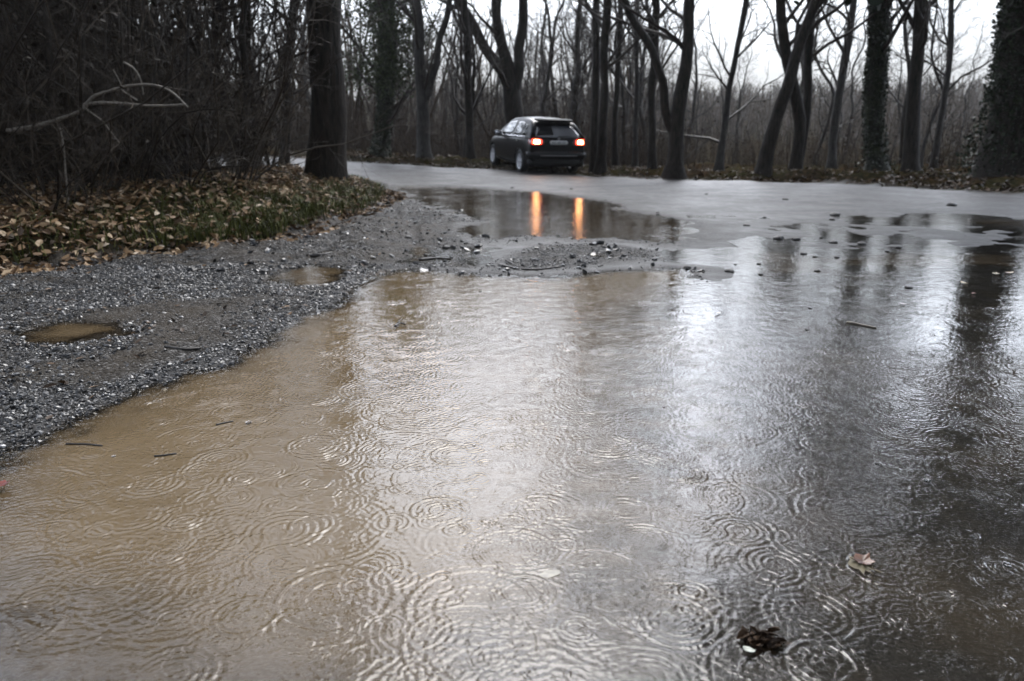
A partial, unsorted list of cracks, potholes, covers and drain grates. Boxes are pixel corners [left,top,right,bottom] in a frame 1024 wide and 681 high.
pothole [0,268,772,681]
